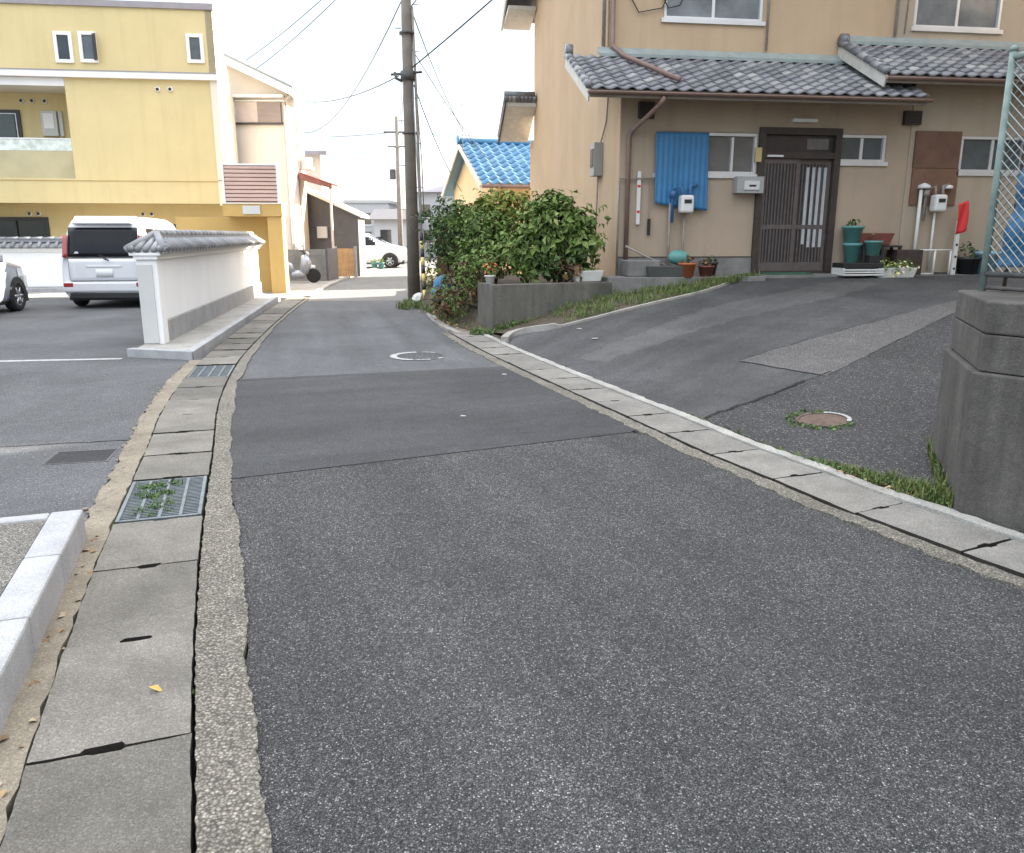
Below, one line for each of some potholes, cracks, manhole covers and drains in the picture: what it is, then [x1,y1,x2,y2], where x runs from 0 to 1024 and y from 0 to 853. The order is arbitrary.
manhole cover [795,412,852,426]
manhole cover [390,352,446,360]
drain grate [186,365,235,378]
drain grate [115,475,208,534]
manhole cover [41,448,120,465]
